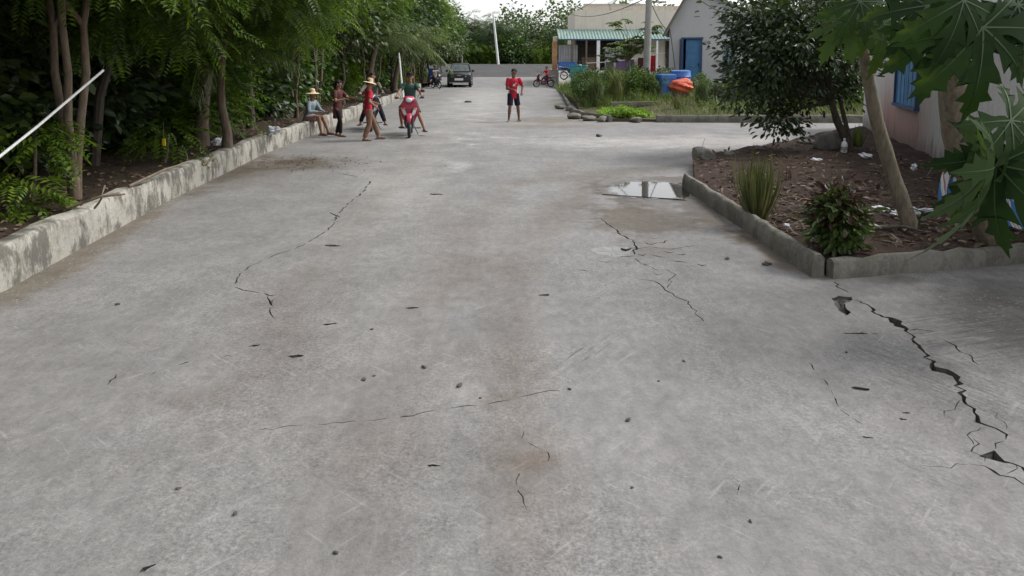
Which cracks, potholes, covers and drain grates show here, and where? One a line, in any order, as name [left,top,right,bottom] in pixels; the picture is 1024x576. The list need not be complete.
crack [584,218,704,322]
crack [235,174,371,318]
crack [257,390,560,431]
crack [834,282,1024,485]
crack [515,432,550,512]
